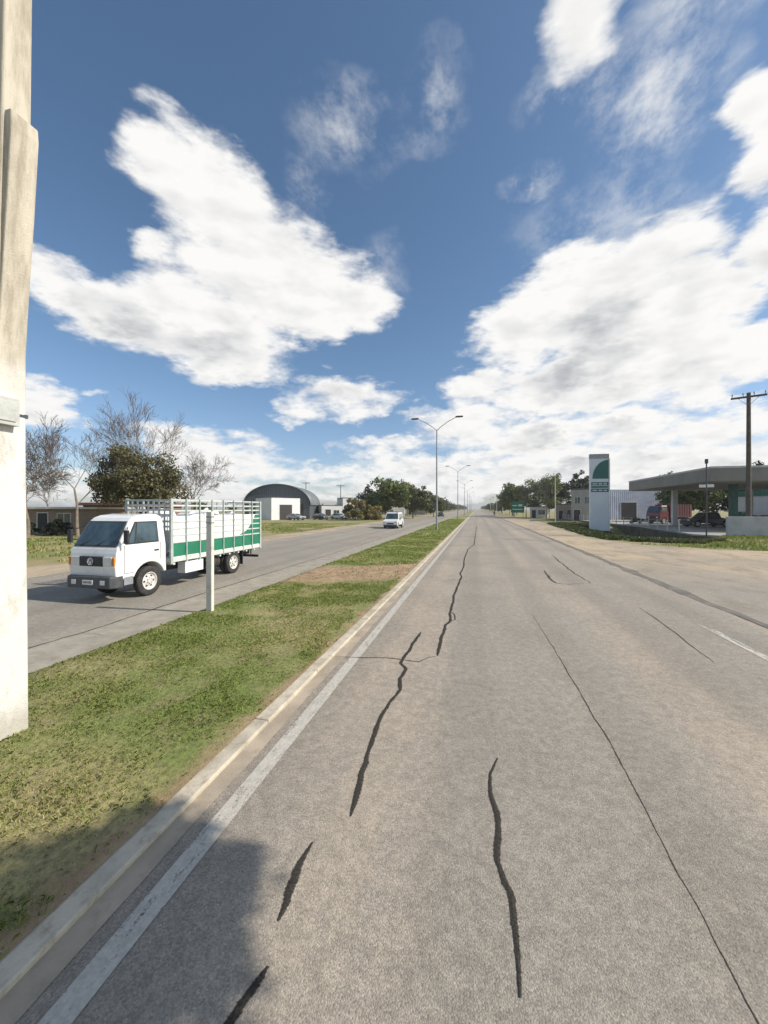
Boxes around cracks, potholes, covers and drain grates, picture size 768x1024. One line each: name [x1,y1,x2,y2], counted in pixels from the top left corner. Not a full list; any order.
crack [640,608,715,663]
crack [277,841,313,921]
crack [224,965,269,1024]
crack [517,539,591,584]
crack [356,526,477,662]
